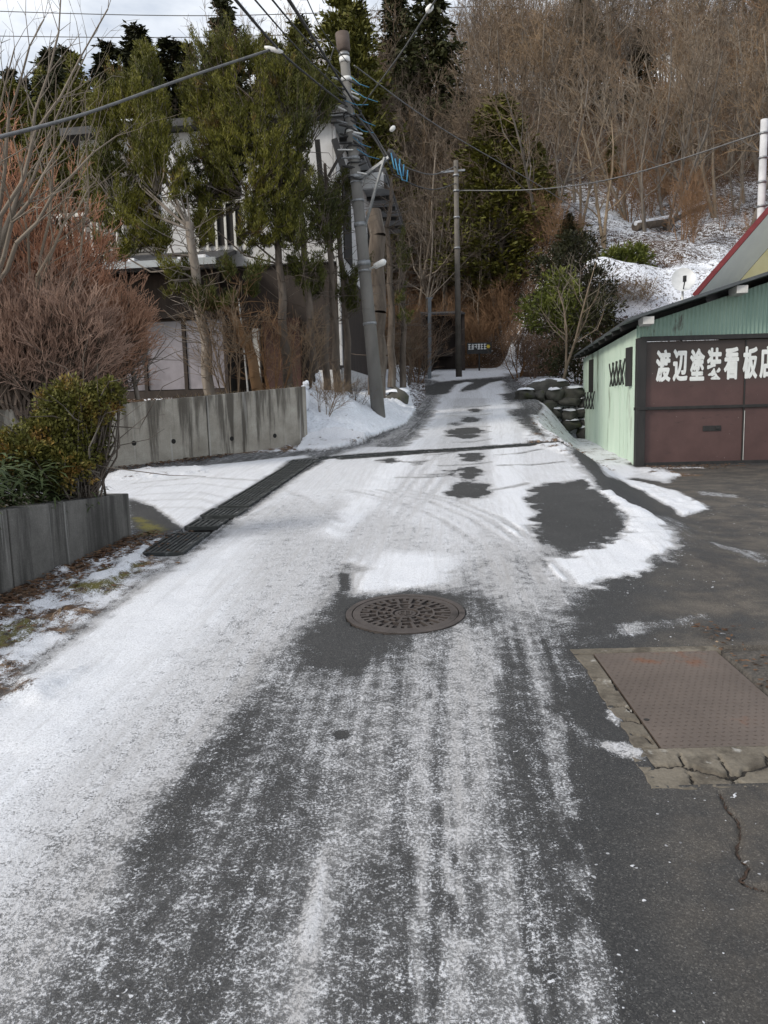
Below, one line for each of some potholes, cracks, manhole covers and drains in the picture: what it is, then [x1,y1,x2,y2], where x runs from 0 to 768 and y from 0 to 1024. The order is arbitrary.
manhole cover [346,594,465,635]
crack [653,756,768,893]
